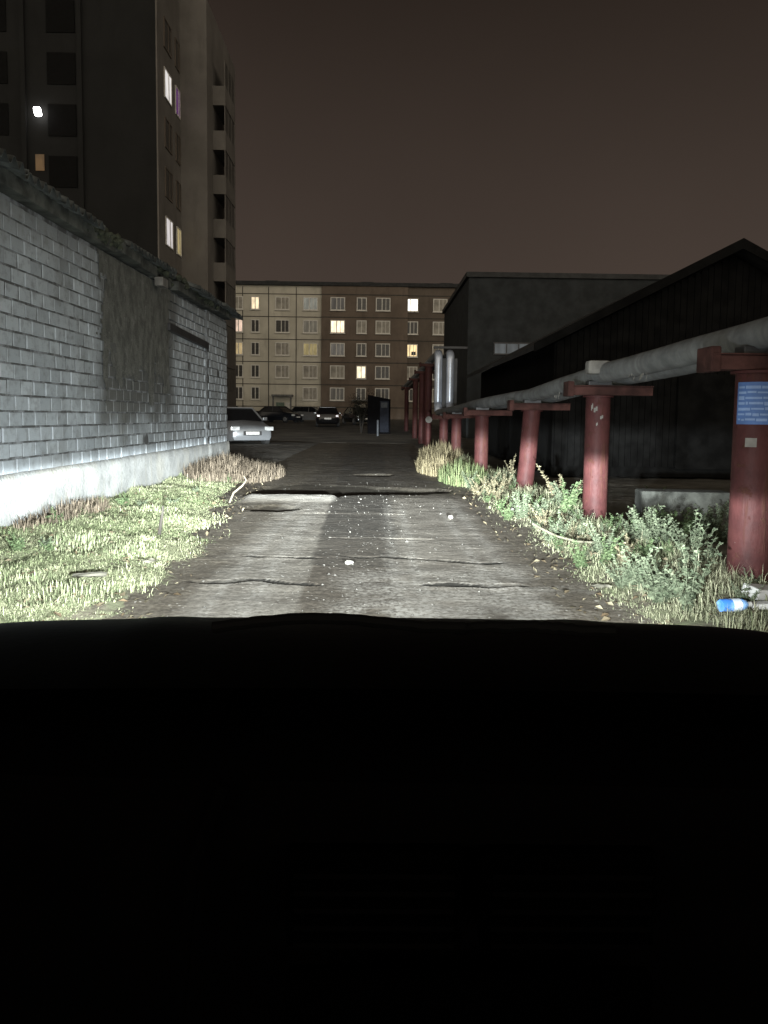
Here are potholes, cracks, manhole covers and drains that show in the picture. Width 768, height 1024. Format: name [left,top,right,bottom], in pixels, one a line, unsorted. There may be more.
crack [182,555,511,587]
